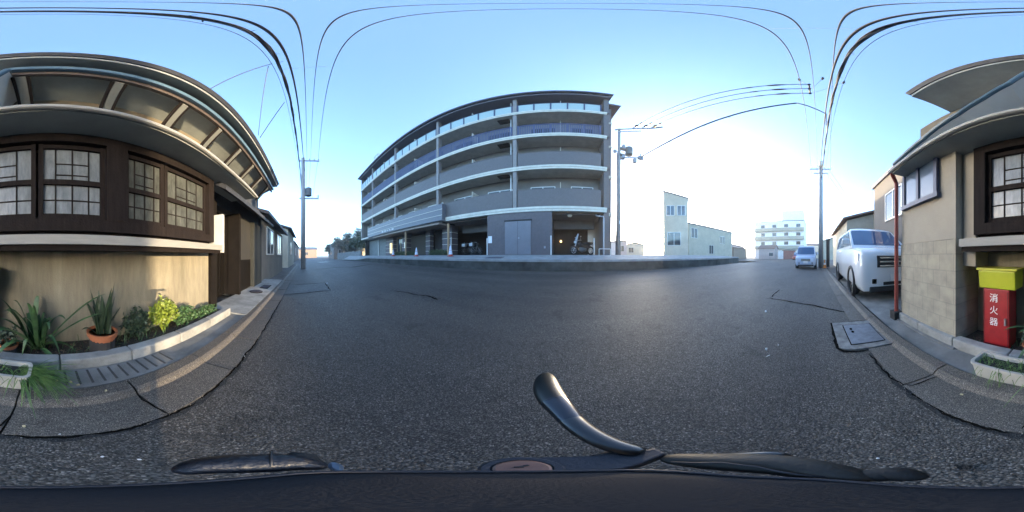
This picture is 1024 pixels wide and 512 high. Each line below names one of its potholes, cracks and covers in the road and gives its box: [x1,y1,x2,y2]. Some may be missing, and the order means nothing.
manhole cover [832,320,892,351]
crack [766,290,844,312]
